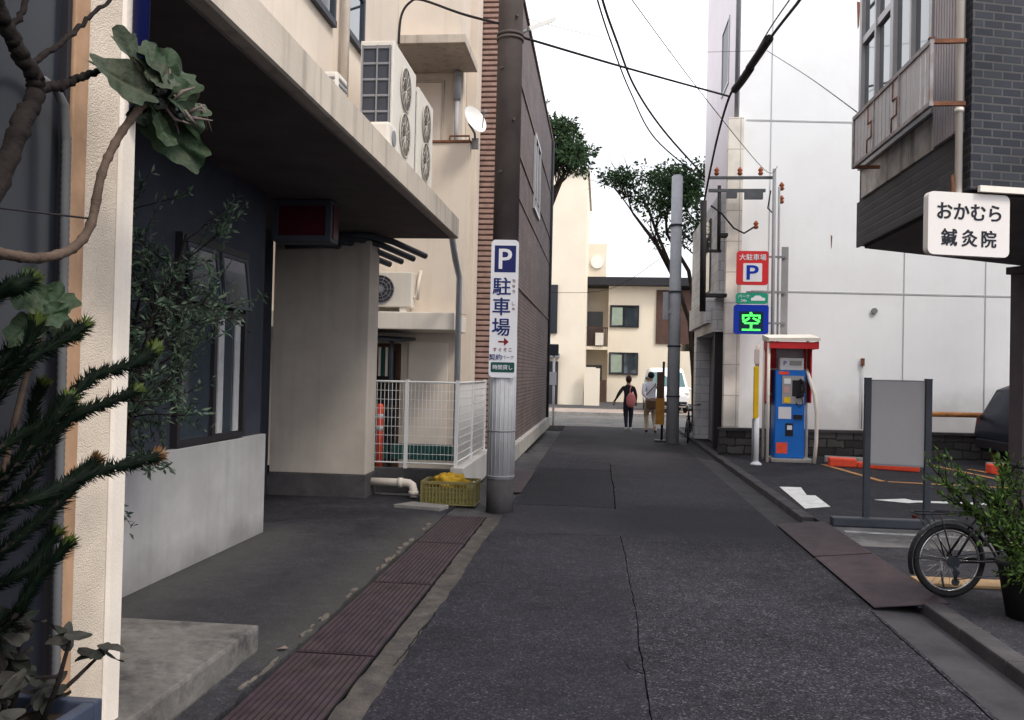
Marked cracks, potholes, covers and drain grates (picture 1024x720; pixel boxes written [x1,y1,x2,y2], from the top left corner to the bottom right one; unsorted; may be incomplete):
crack [550,534,652,720]
